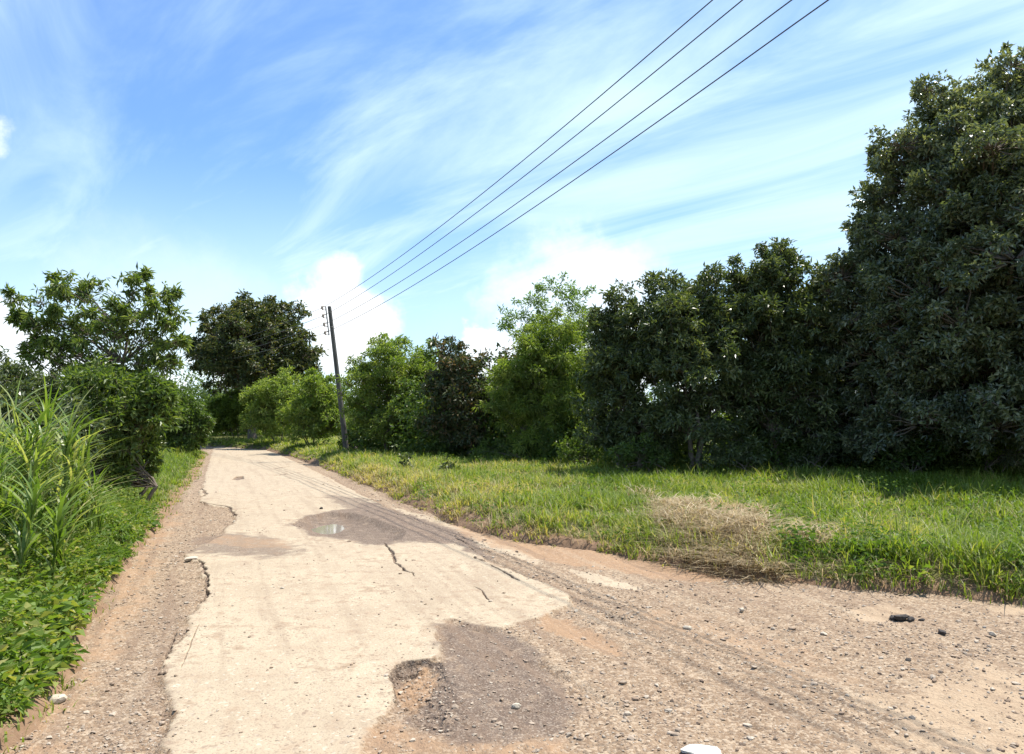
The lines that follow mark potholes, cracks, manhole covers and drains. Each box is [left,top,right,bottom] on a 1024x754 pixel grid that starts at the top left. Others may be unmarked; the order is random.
pothole [290,512,408,543]
crack [156,554,213,671]
crack [382,542,417,577]
pothole [384,657,472,735]
crack [454,538,521,602]
